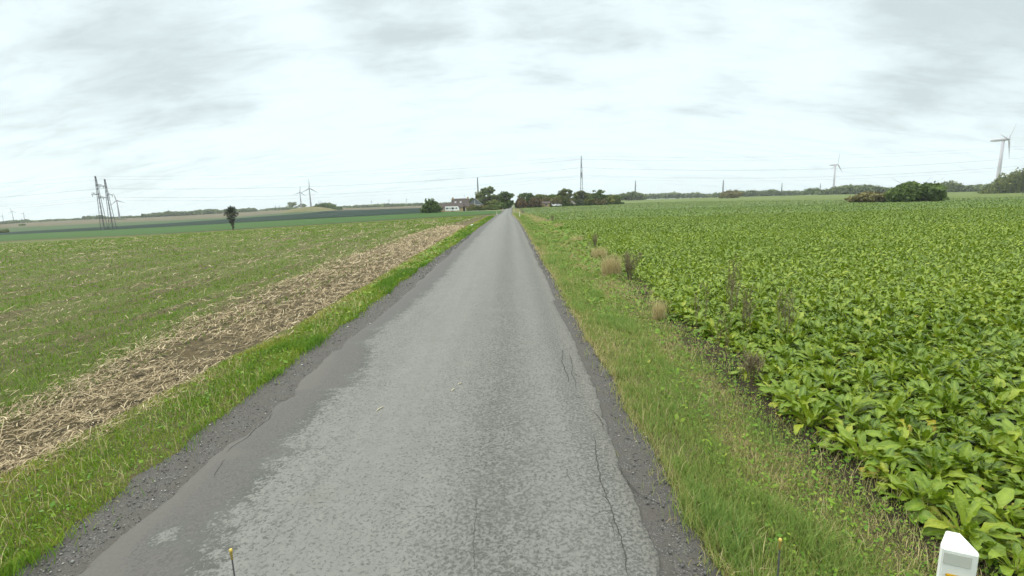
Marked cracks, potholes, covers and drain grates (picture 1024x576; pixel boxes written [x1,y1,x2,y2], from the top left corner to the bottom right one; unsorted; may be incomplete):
crack [561,348,642,576]
